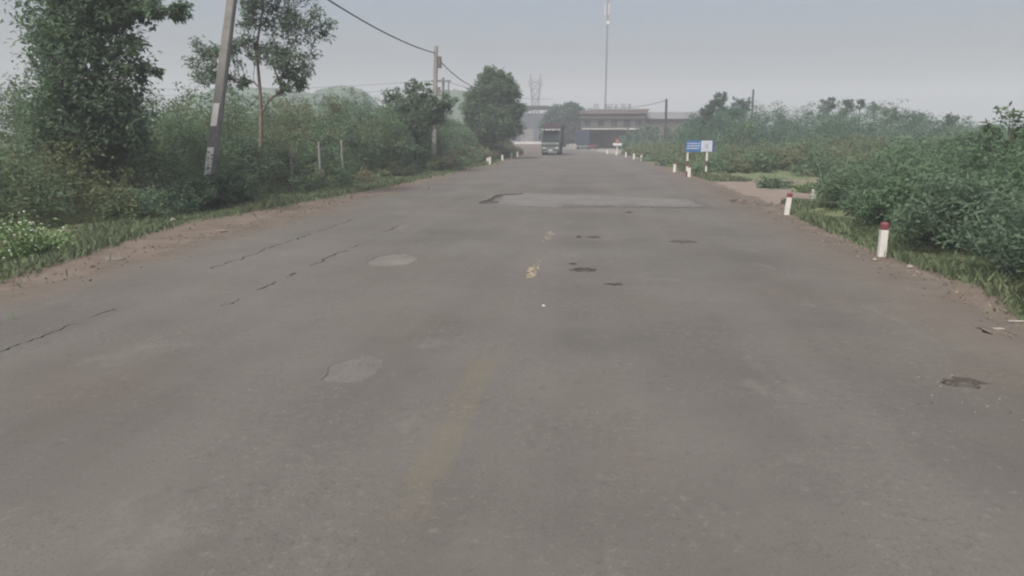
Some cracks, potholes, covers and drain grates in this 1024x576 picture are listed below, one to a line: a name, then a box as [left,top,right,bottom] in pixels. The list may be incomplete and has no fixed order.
pothole [940,376,990,389]
crack [0,309,115,352]
crack [210,220,351,269]
crack [222,245,357,306]
